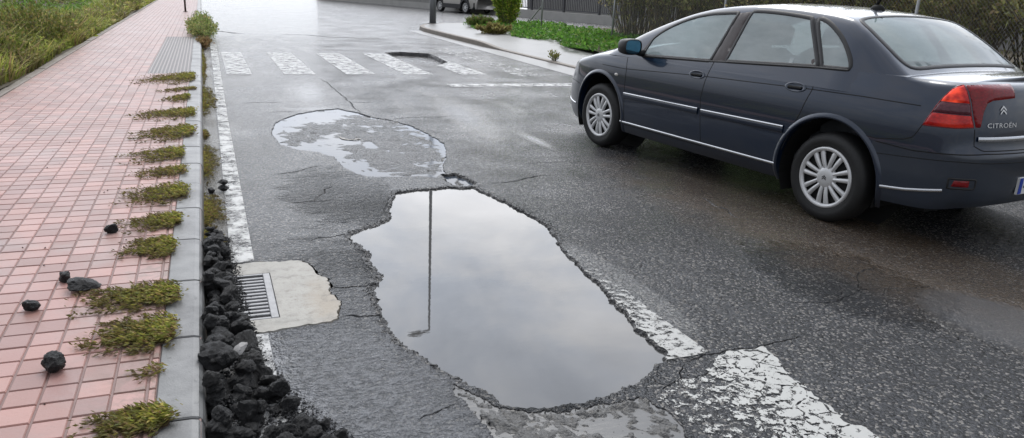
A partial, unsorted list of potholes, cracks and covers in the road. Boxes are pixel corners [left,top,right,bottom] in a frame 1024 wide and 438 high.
crack [319,78,369,117]
pothole [385,52,448,65]
crack [653,336,804,390]
pothole [344,186,668,409]
crack [289,186,332,204]
pothole [271,108,448,178]
pothole [440,173,477,186]
